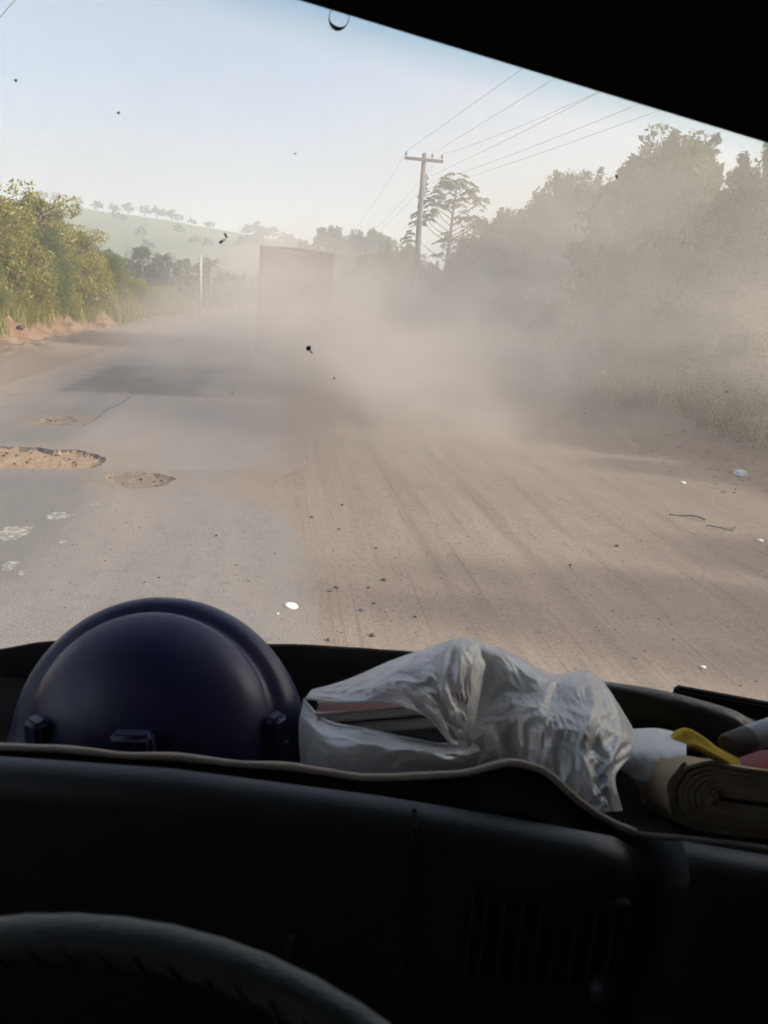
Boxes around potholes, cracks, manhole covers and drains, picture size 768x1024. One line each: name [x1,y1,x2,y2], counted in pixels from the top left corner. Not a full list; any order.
pothole [25,416,78,426]
pothole [104,471,176,489]
pothole [0,446,107,470]
